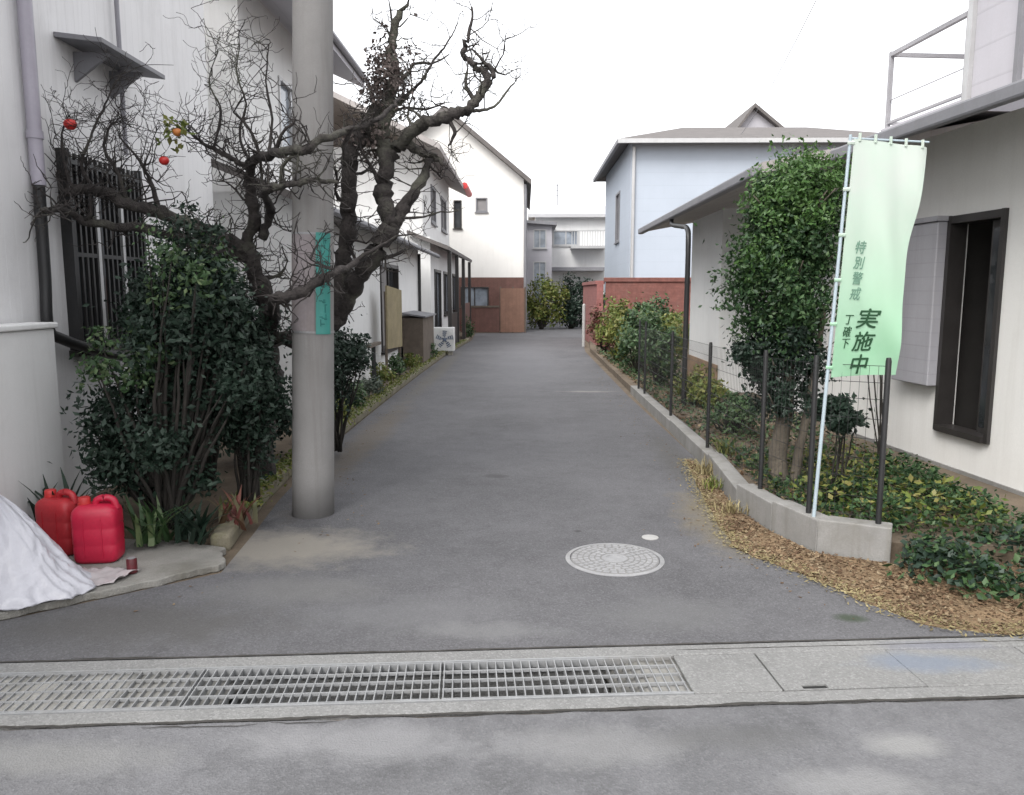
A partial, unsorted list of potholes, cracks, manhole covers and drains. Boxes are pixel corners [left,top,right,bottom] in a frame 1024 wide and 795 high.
drain grate [181,662,442,707]
drain grate [442,656,690,699]
manhole cover [566,543,665,577]
drain grate [0,669,206,712]
